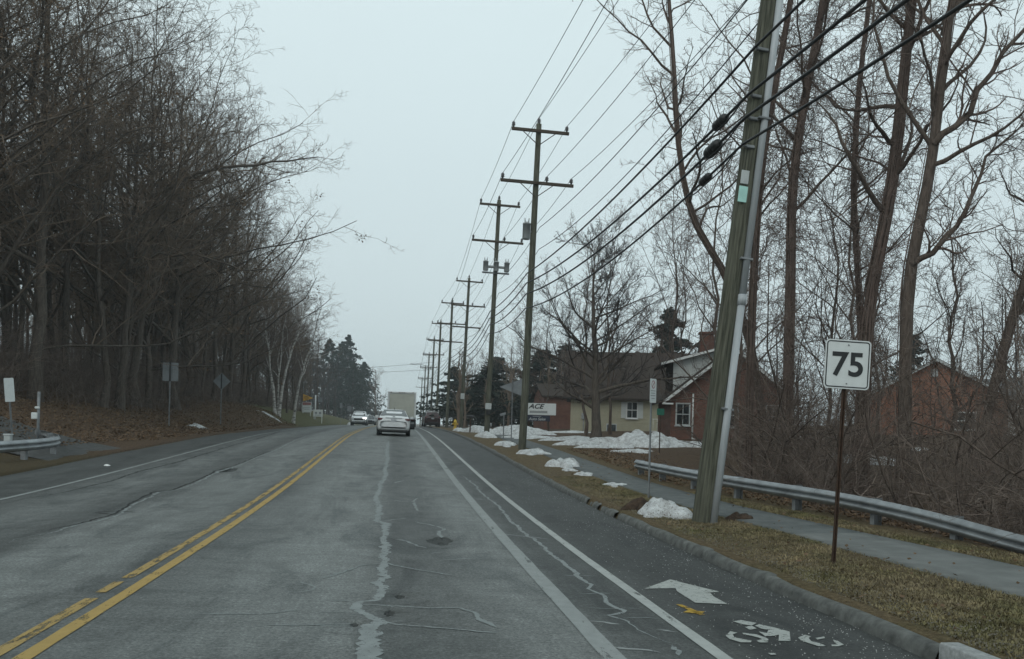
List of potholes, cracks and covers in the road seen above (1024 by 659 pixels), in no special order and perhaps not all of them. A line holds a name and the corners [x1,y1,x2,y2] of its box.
crack [1,431,280,504]
crack [211,441,684,659]
